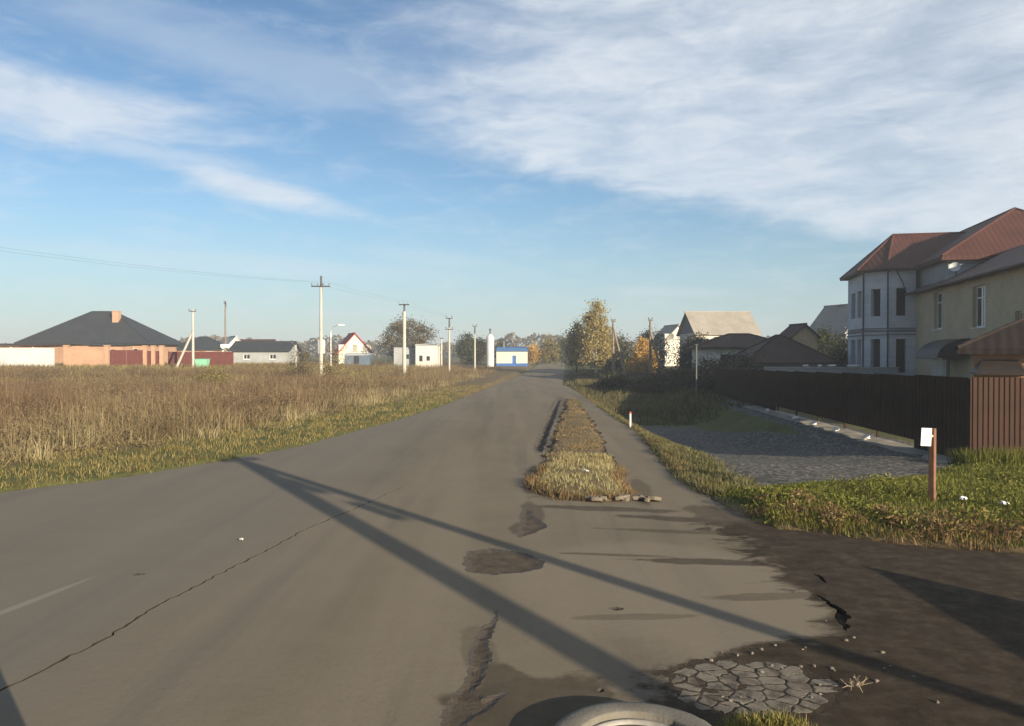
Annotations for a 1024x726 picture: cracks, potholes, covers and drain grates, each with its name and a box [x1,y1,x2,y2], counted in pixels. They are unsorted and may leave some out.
crack [439,611,509,726]
crack [0,487,402,691]
crack [814,574,852,631]
